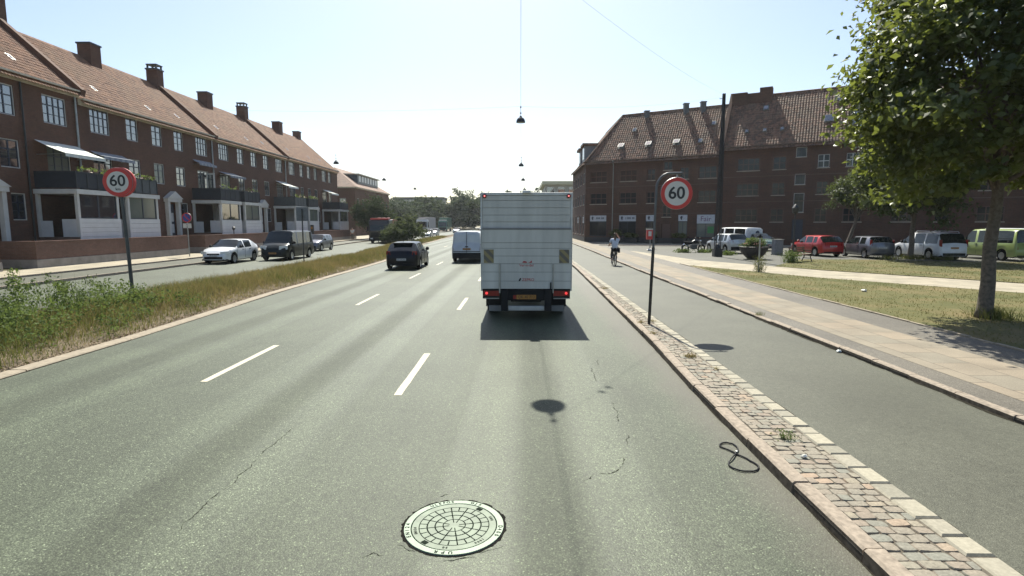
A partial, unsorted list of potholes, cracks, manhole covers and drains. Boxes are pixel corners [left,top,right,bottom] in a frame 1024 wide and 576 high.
manhole cover [401,500,507,557]
crack [181,429,291,529]
